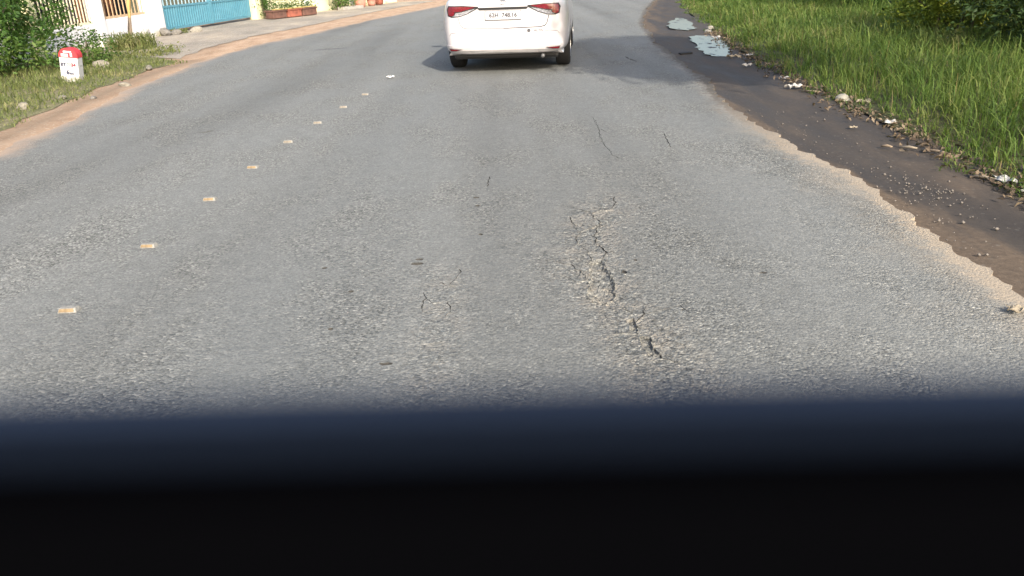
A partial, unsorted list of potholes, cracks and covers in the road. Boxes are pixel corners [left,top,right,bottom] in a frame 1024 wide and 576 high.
crack [556,194,689,362]
crack [421,268,462,317]
